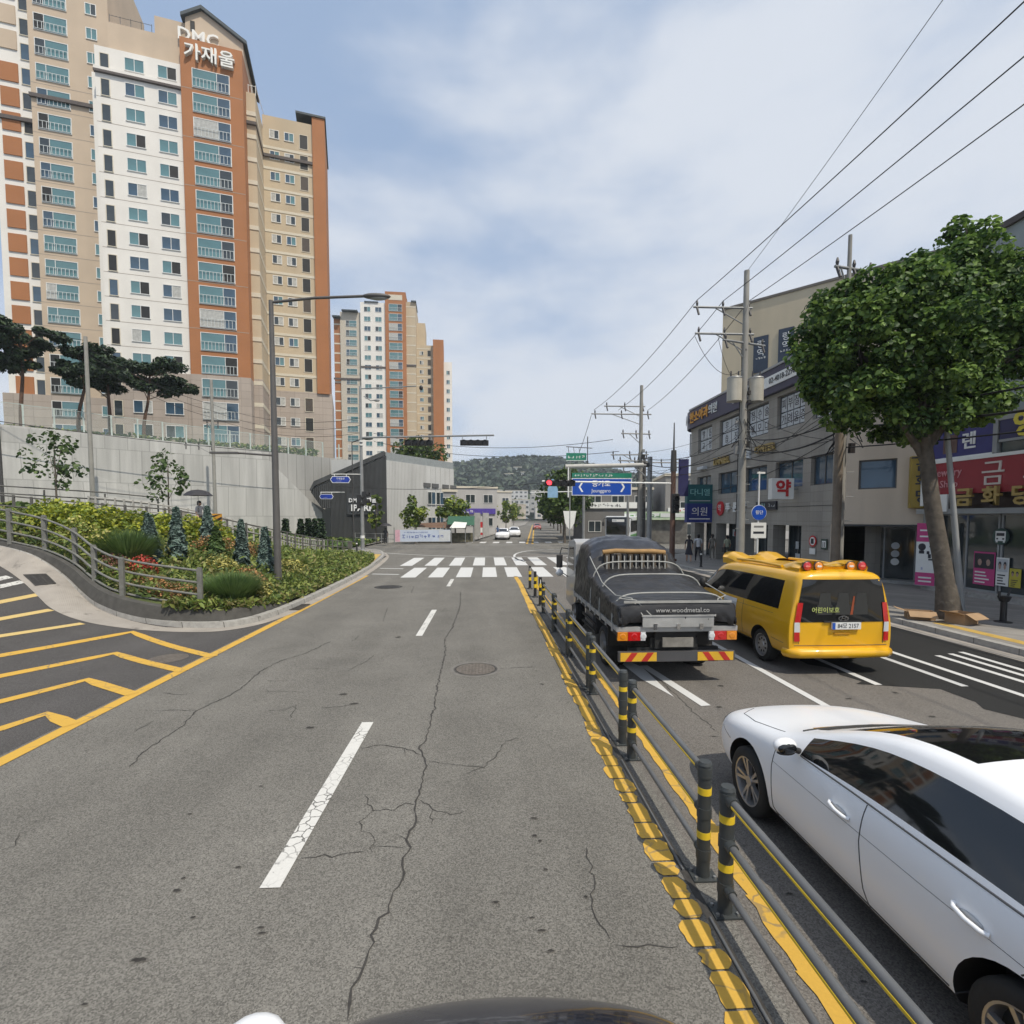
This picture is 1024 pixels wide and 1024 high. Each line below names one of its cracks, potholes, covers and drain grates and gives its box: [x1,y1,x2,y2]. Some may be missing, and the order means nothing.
crack [586,847,679,948]
crack [129,642,329,767]
crack [304,592,517,1016]
drain grate [23,573,56,586]
manhole cover [449,662,502,677]
